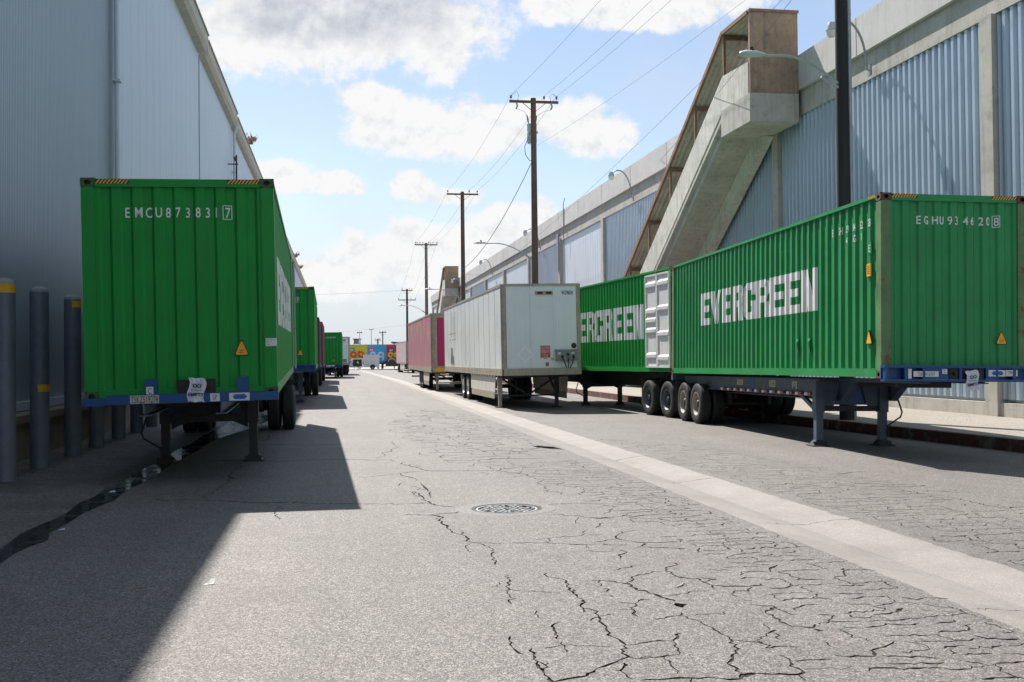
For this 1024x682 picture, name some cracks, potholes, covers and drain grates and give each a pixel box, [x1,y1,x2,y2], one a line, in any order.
manhole cover [457,502,556,516]
crack [154,409,1024,682]
